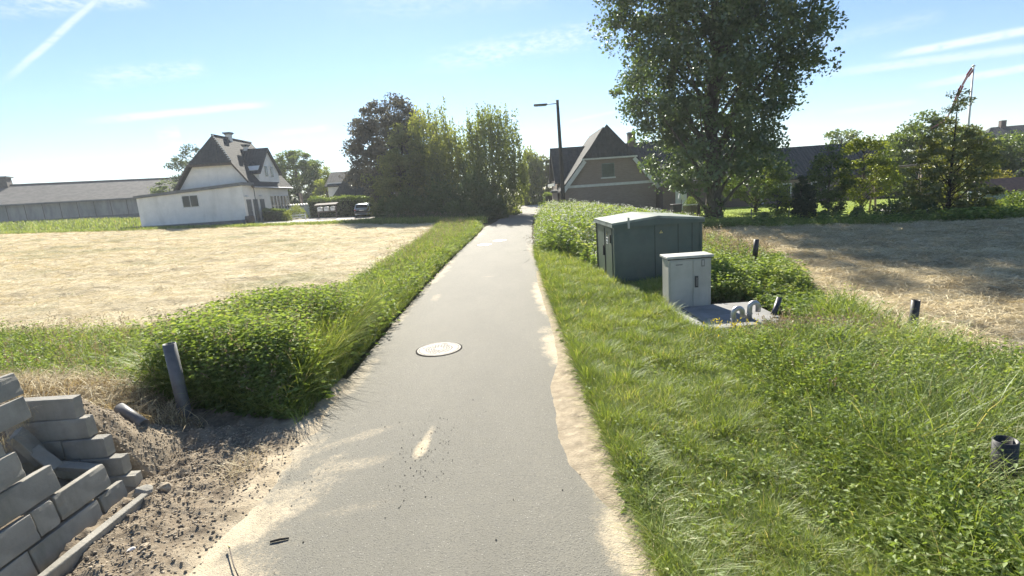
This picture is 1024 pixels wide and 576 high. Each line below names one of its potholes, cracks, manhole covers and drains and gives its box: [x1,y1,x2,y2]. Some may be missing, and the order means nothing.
manhole cover [416,342,462,357]
